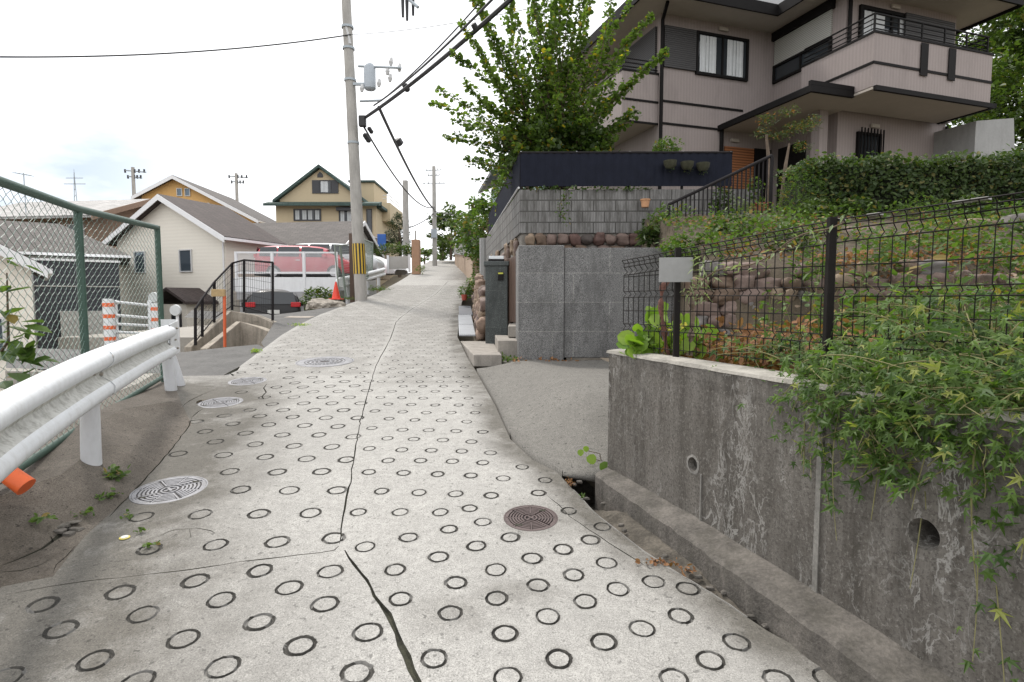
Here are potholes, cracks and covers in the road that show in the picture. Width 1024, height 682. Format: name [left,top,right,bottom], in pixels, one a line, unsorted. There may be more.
manhole cover [504,505,558,531]
manhole cover [129,476,208,505]
manhole cover [228,377,267,385]
manhole cover [197,397,243,410]
crack [17,289,441,682]
manhole cover [295,356,354,367]
